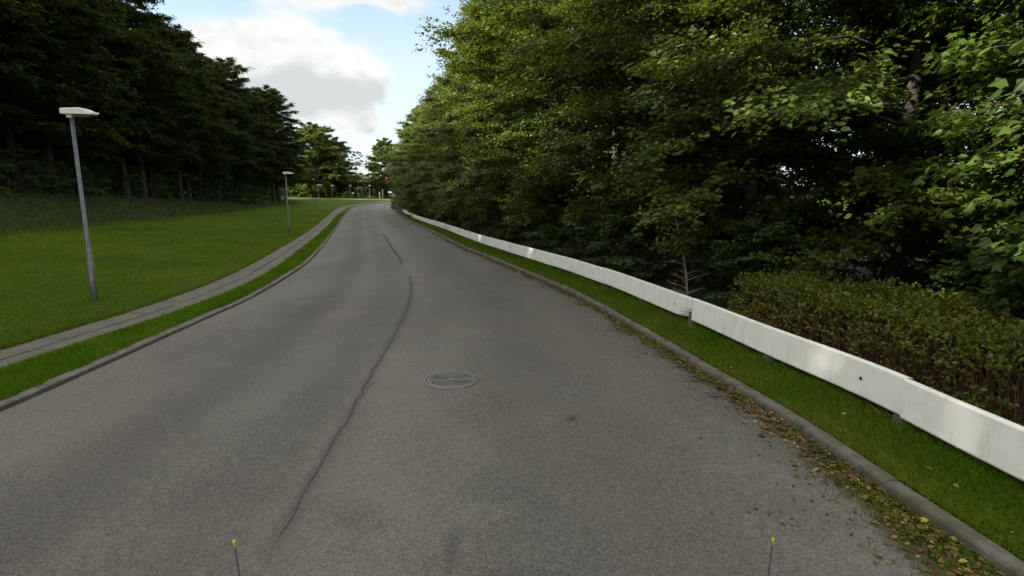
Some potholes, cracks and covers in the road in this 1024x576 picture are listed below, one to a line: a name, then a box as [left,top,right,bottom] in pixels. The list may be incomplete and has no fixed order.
crack [276,234,413,540]
manhole cover [423,370,479,390]
